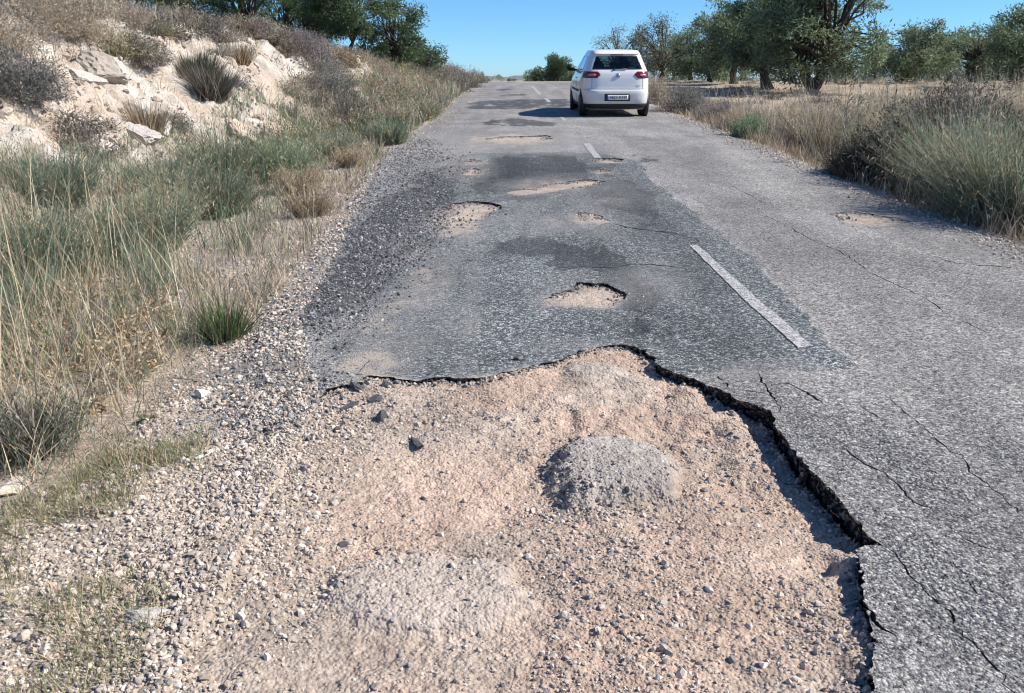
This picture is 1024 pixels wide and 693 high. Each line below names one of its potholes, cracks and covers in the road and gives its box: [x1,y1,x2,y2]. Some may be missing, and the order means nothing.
pothole [428,201,502,230]
pothole [505,179,604,195]
pothole [830,212,911,226]
crack [862,398,1023,517]
crack [833,435,1021,561]
crack [767,216,1019,349]
pothole [574,212,611,225]
crack [876,543,1016,693]
crack [717,370,822,411]
pothole [542,282,627,308]
pothole [134,344,882,693]
